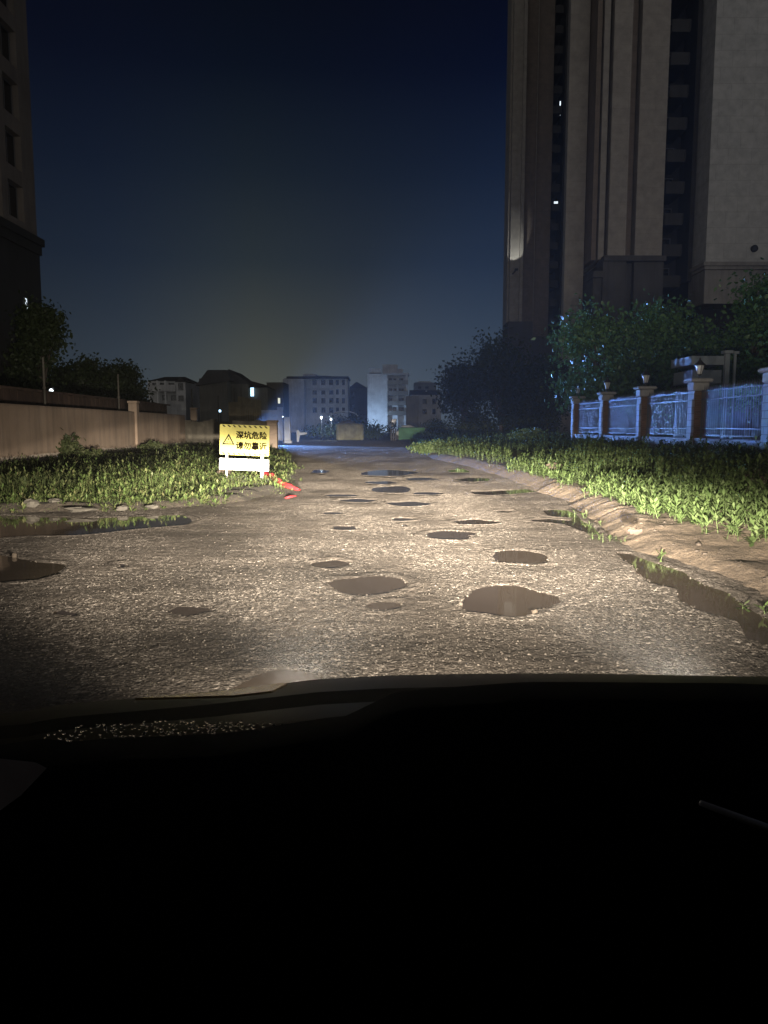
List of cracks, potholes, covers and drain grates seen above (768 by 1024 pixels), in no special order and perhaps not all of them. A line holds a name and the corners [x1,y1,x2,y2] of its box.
pothole [146,601,230,621]
pothole [465,488,538,496]
pothole [366,485,416,494]
pothole [441,581,580,621]
pothole [478,548,563,566]
pothole [311,572,423,598]
pothole [415,529,487,541]
pothole [0,513,201,539]
pothole [296,557,365,570]
pothole [356,469,423,477]
pothole [602,550,768,653]
pothole [347,597,419,615]
